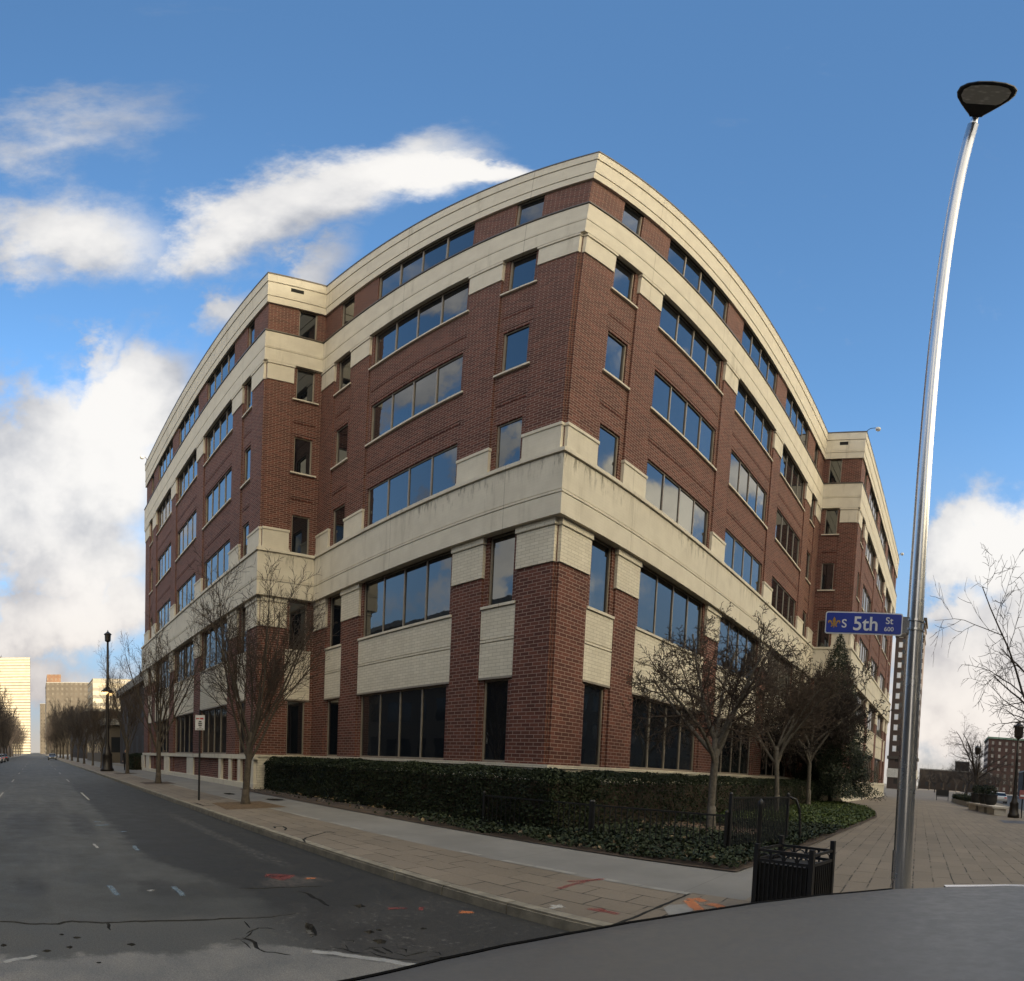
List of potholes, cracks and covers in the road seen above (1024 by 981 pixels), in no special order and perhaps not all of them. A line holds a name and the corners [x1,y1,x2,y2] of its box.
crack [0,886,329,955]
